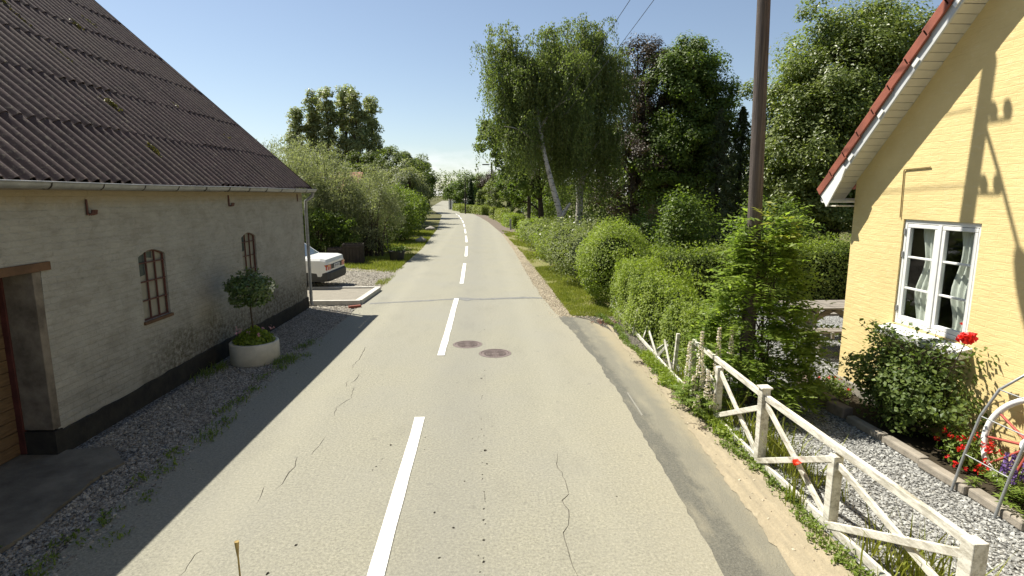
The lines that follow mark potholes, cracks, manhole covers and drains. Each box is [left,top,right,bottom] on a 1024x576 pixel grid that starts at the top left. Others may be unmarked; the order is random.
manhole cover [479,349,511,358]
crack [556,454,578,576]
manhole cover [453,340,482,348]
